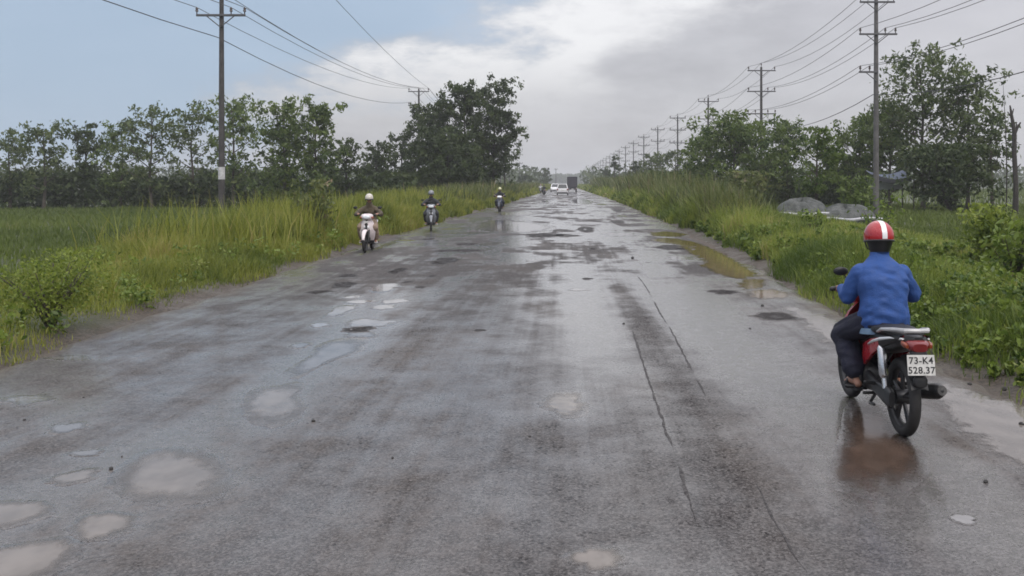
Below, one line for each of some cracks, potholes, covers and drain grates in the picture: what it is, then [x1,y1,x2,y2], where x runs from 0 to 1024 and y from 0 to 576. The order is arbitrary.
pothole [240,382,305,429]
pothole [748,312,807,322]
crack [632,277,704,520]
pothole [947,514,978,526]
pothole [103,446,235,507]
pothole [0,535,87,576]
pothole [536,392,590,418]
pothole [46,421,91,435]
pothole [0,500,57,530]
pothole [426,257,464,265]
crack [757,486,805,569]
pothole [559,547,629,574]
